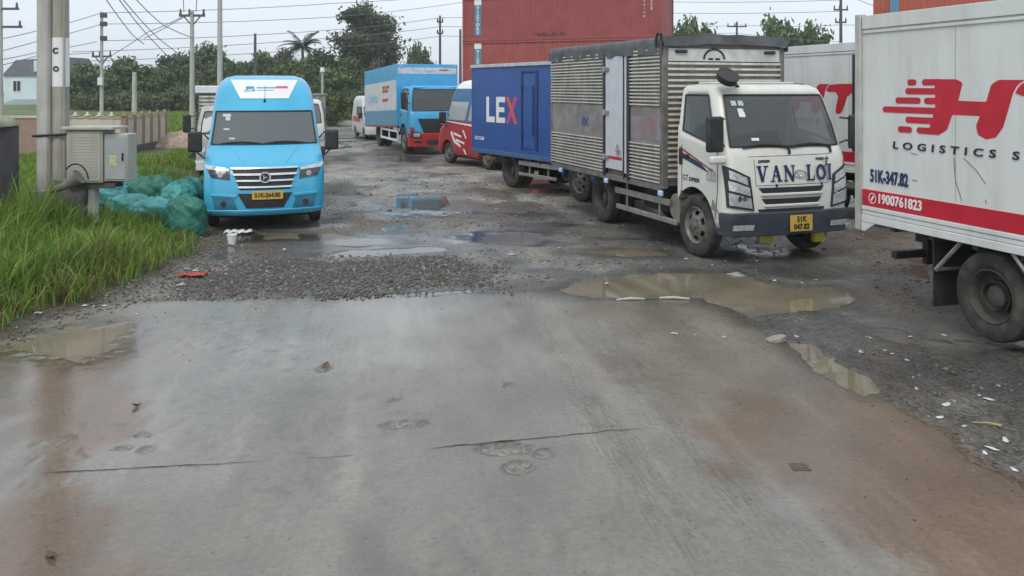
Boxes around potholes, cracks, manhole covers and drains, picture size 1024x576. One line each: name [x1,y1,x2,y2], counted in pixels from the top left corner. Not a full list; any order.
pothole [786,340,887,397]
crack [43,428,637,473]
pothole [477,231,553,246]
pothole [136,445,158,453]
pothole [502,459,538,475]
pothole [379,419,430,429]
pothole [554,269,861,324]
pothole [474,440,537,457]
pothole [0,316,161,369]
pothole [369,195,455,210]
pothole [534,447,556,459]
